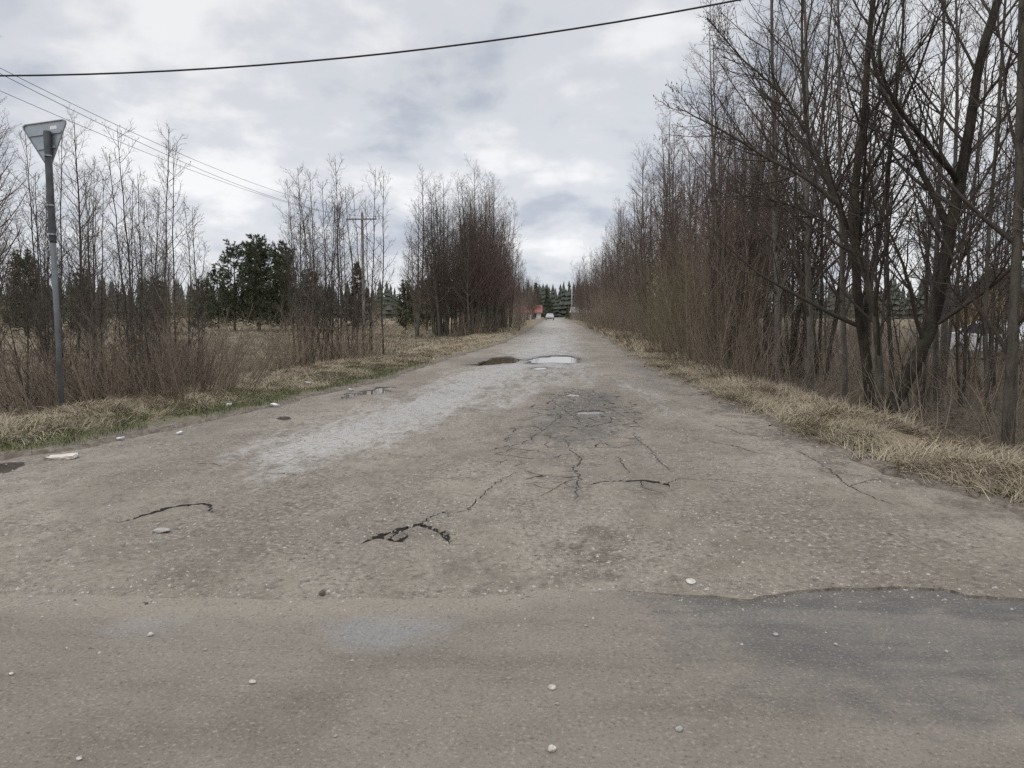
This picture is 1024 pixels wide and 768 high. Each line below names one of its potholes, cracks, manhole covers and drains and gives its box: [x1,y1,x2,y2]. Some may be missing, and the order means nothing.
crack [122,503,213,522]
pothole [465,356,523,366]
pothole [525,355,581,364]
crack [363,473,514,544]
pothole [360,387,395,395]
crack [490,388,735,498]
crack [798,451,888,503]
pothole [0,462,25,473]
